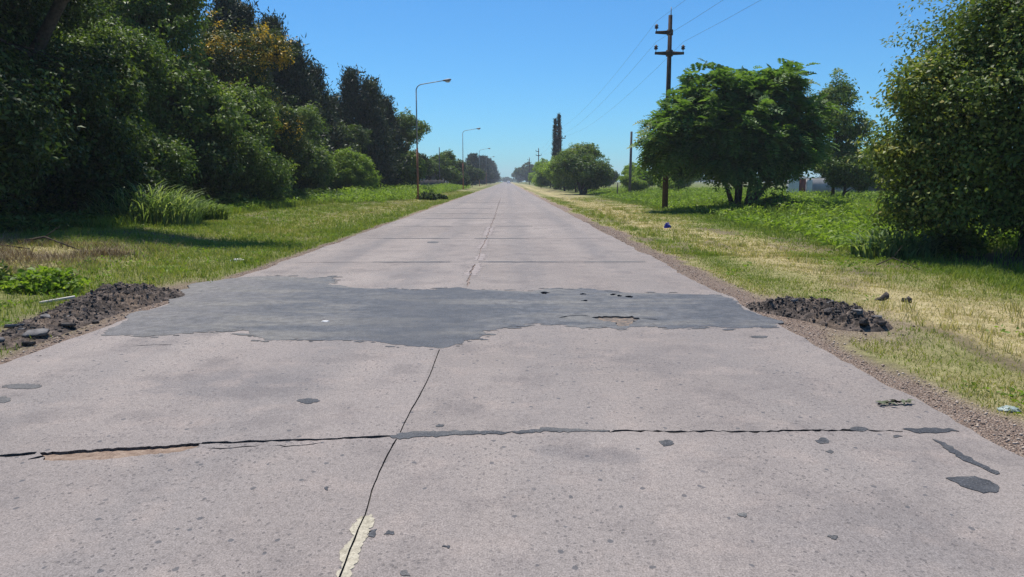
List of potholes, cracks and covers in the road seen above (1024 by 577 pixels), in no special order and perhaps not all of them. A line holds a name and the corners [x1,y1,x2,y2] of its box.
pothole [596,316,639,326]
crack [466,207,498,286]
crack [201,435,390,449]
